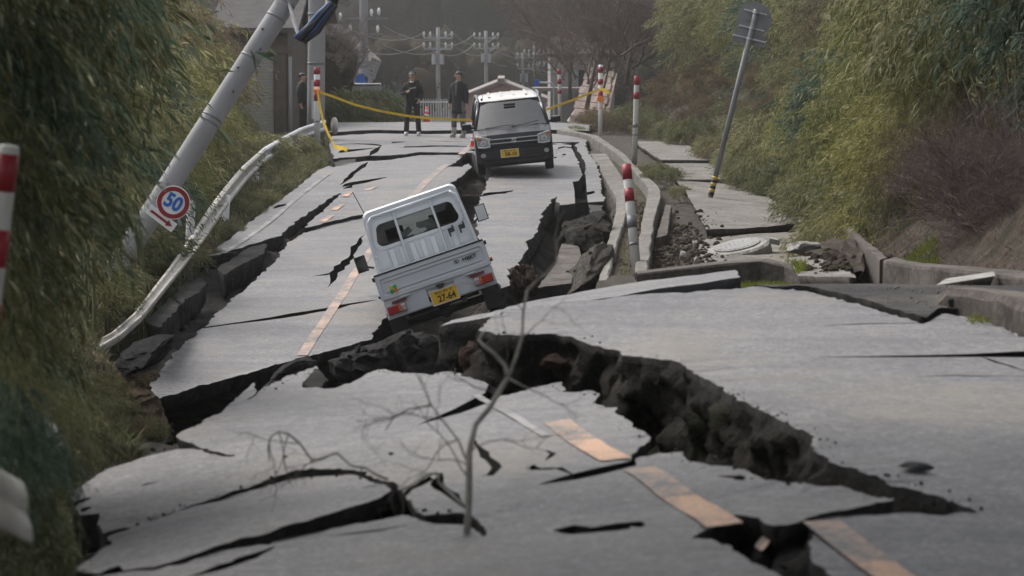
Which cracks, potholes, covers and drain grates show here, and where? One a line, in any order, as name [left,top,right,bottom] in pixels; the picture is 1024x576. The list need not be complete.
crack [527,450,636,485]
crack [520,142,595,303]
crack [421,384,502,424]
crack [831,323,1024,377]
crack [135,235,374,389]
manhole cover [707,236,780,255]
crack [341,440,502,535]
crack [193,543,274,576]
crack [554,522,645,534]
